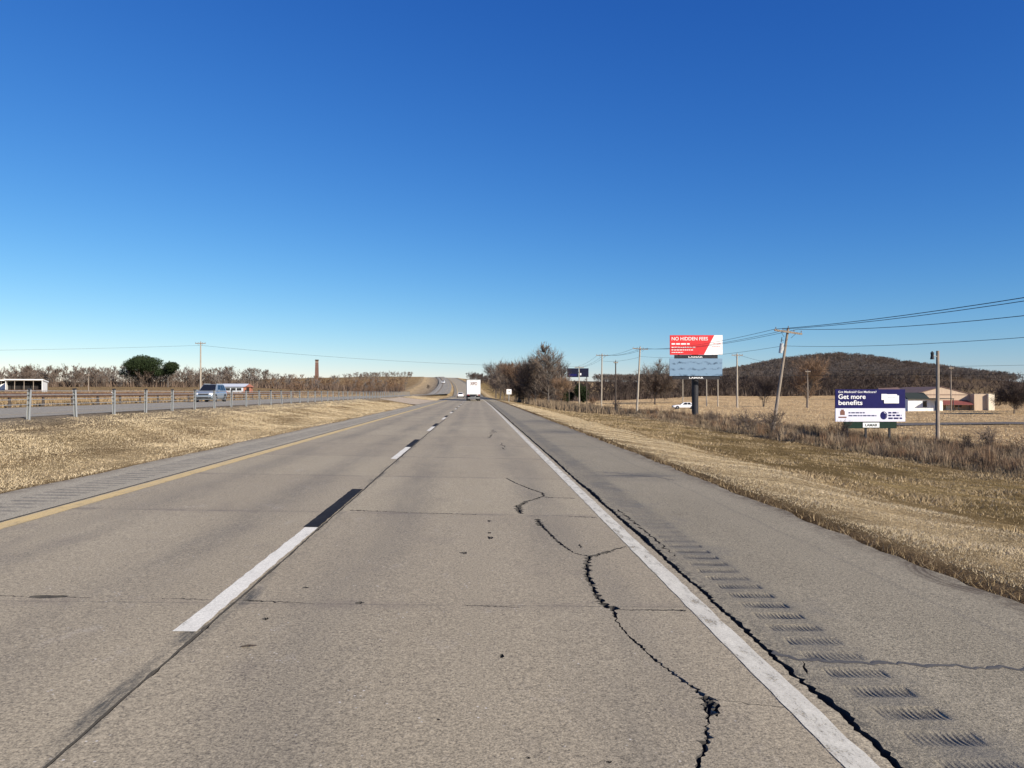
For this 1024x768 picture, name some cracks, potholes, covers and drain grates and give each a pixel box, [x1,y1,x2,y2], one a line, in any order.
crack [466,403,903,768]
